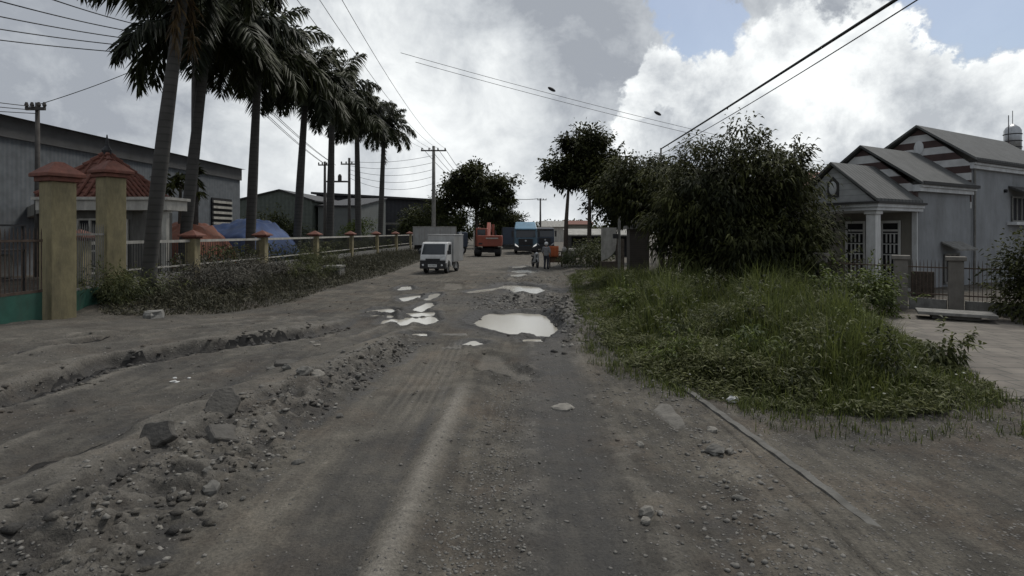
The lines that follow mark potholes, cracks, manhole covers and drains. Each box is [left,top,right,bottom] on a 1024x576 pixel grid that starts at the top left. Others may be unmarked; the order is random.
pothole [519,334,544,342]
pothole [490,282,562,294]
pothole [420,292,442,300]
pothole [417,314,441,324]
pothole [397,314,424,325]
pothole [461,304,571,340]
